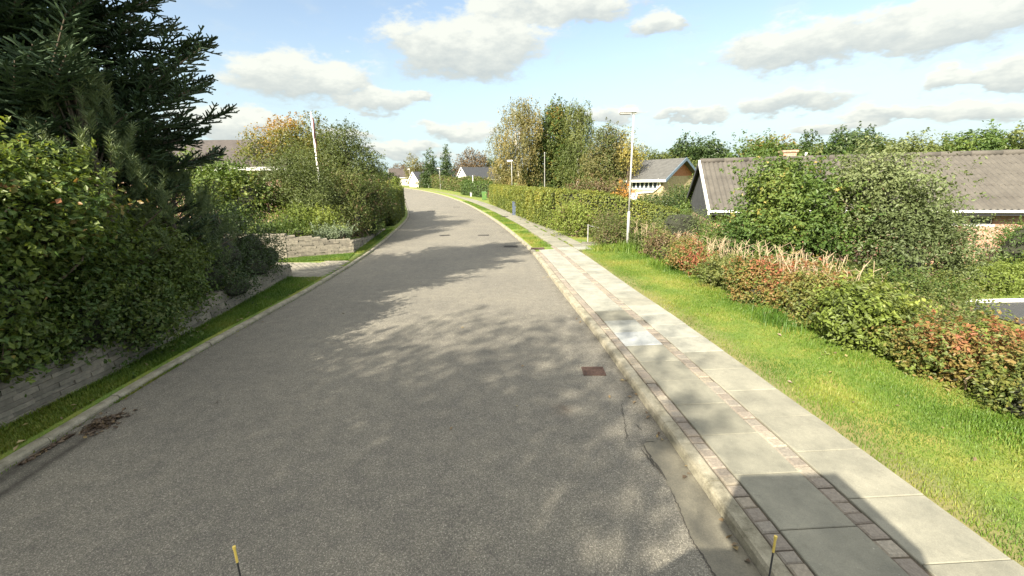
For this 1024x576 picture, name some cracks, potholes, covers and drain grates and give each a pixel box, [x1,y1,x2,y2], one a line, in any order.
crack [621,405,667,480]
